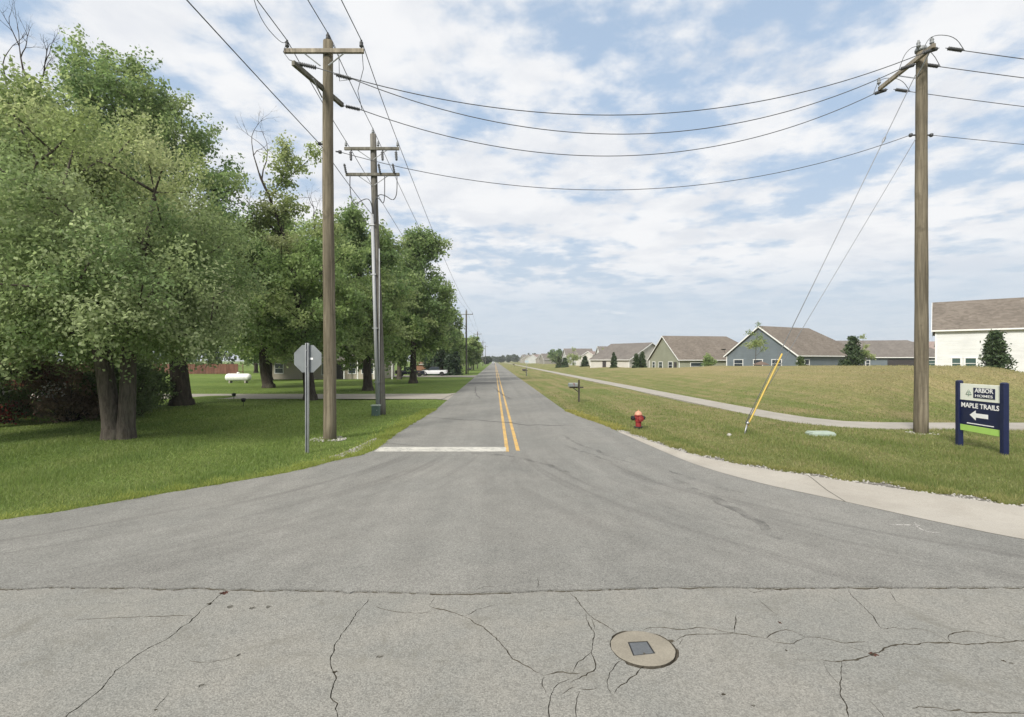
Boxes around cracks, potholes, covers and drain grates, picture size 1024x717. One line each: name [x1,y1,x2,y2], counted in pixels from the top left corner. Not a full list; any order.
crack [66,593,222,717]
crack [644,589,1024,717]
manhole cover [610,631,679,669]
crack [330,586,644,717]
